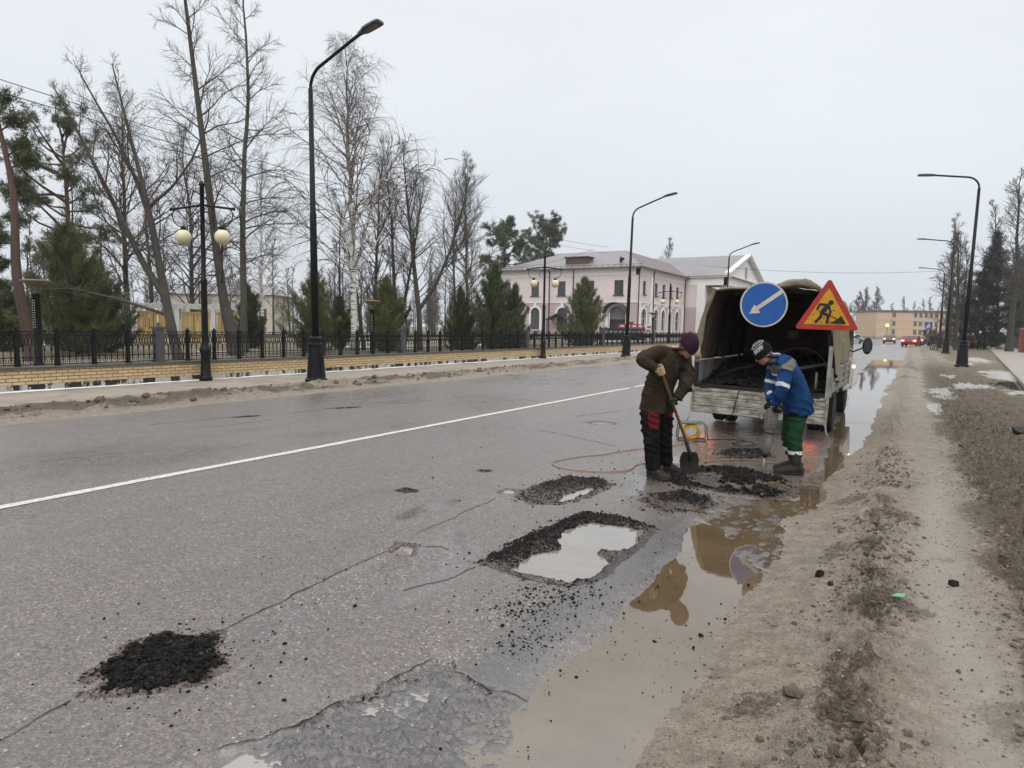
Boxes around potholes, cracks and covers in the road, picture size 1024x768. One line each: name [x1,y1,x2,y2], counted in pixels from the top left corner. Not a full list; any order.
crack [403,564,563,591]
pothole [637,489,718,514]
pothole [479,511,659,587]
pothole [513,475,617,505]
pothole [716,448,773,459]
pothole [387,540,420,556]
crack [217,659,528,750]
